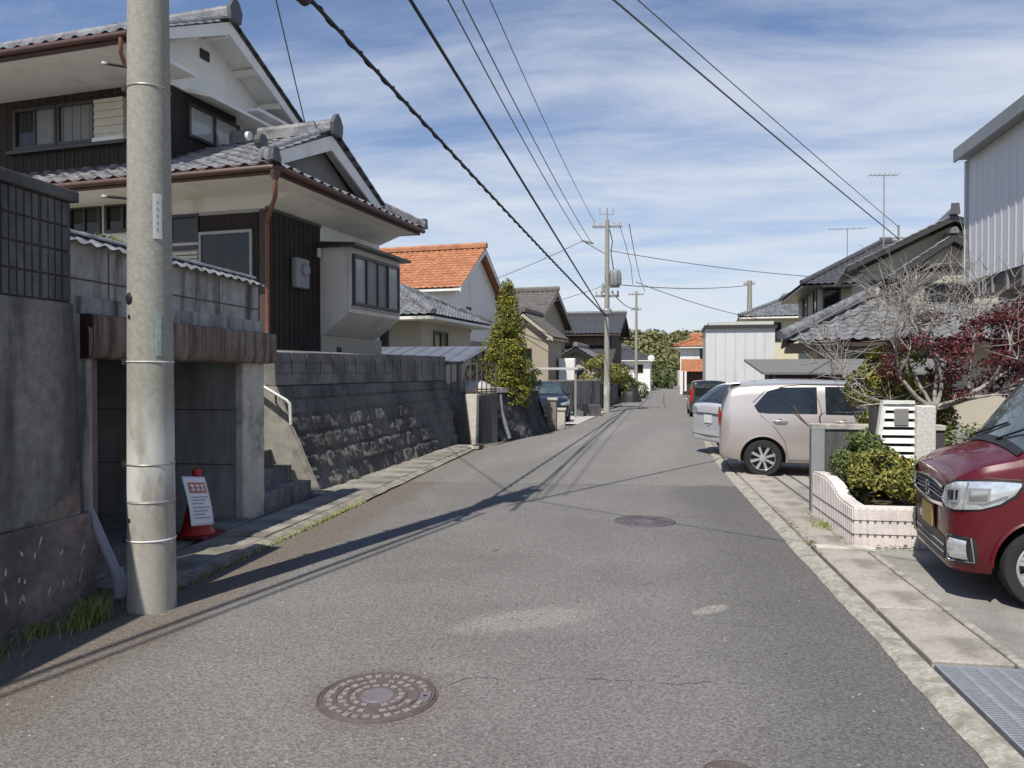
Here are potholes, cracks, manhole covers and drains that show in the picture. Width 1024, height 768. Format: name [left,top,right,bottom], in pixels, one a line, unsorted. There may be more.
manhole cover [315,672,438,724]
crack [443,677,751,688]
manhole cover [614,515,676,527]
manhole cover [702,760,752,768]
drain grate [934,664,1024,758]
